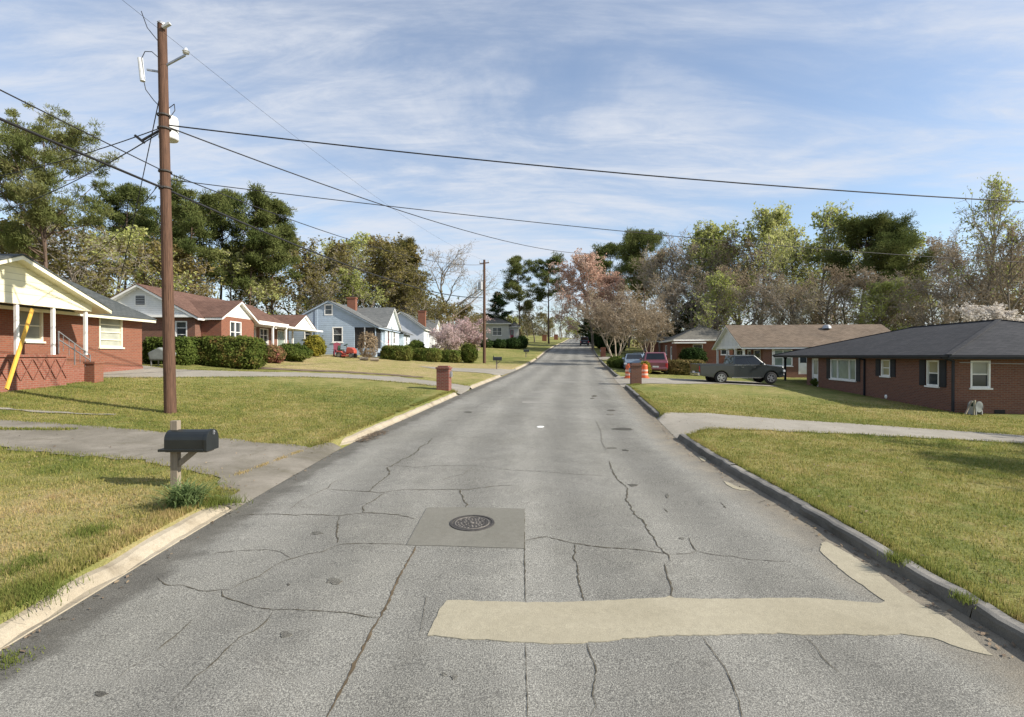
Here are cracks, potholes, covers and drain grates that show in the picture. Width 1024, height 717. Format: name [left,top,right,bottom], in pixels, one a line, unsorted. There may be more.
crack [109,579,369,704]
crack [526,461,773,600]
crack [701,636,742,716]
crack [587,643,597,717]
manhole cover [450,515,495,531]
crack [211,402,503,589]
